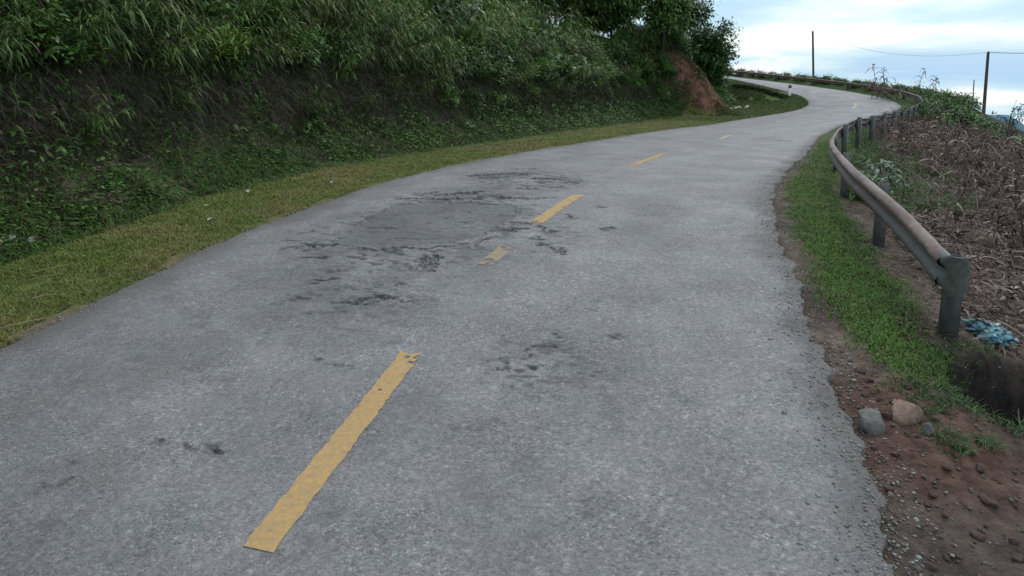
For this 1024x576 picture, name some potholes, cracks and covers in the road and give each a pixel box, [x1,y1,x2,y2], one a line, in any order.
pothole [409,254,445,272]
crack [395,168,582,201]
crack [285,282,436,306]
pothole [145,438,225,455]
crack [279,221,534,273]
